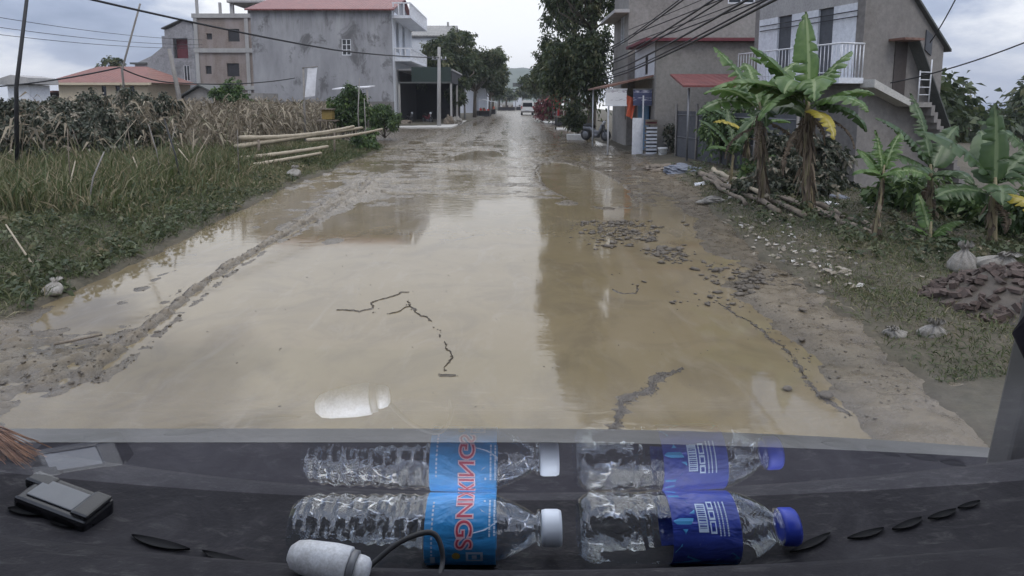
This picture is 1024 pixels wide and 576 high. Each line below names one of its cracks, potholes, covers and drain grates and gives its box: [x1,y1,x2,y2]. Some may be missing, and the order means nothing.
crack [718,303,855,418]
crack [336,291,458,377]
crack [604,367,684,430]
